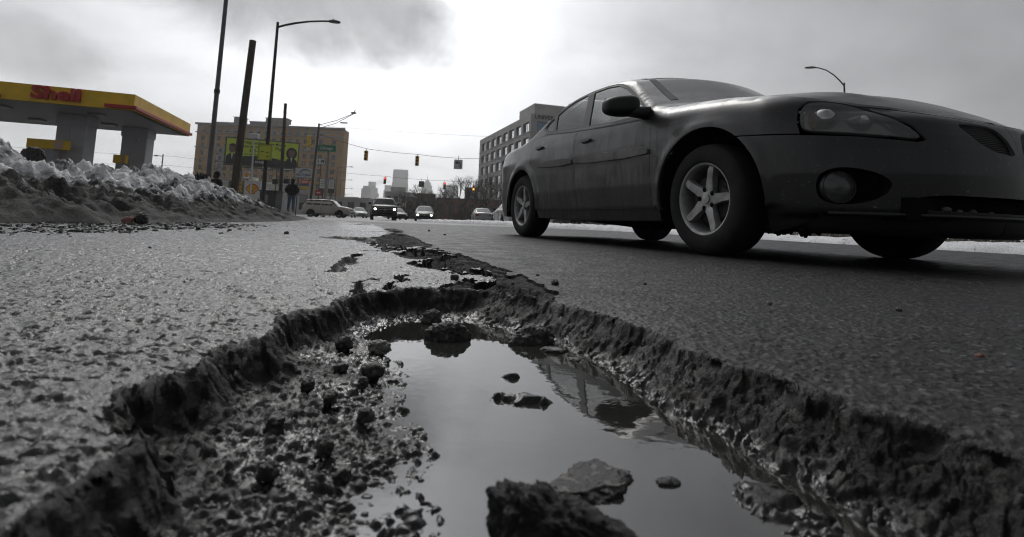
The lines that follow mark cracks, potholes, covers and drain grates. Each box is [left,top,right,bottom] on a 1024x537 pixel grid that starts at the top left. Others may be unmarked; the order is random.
pothole [0,286,1024,537]
pothole [356,228,560,303]
